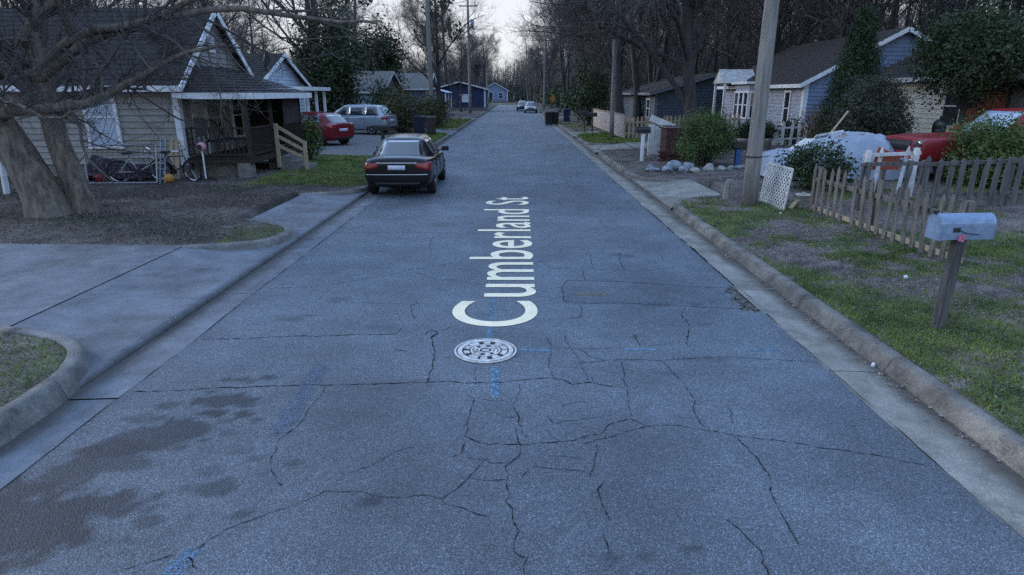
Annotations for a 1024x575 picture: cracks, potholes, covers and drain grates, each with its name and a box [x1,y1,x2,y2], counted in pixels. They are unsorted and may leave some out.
crack [135,253,811,485]
pothole [724,286,769,313]
manhole cover [454,338,517,364]
crack [112,554,197,572]
crack [190,386,924,574]
